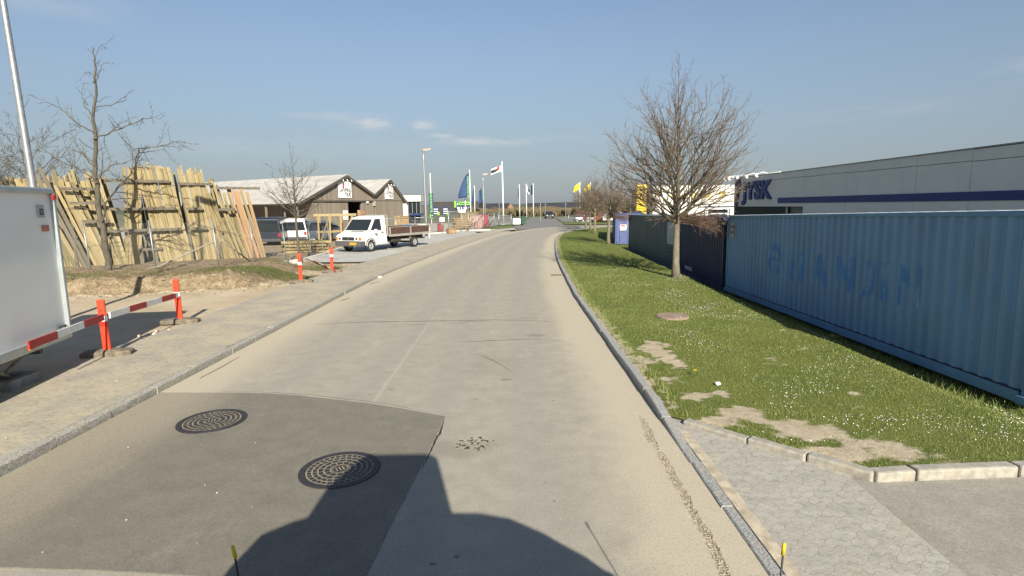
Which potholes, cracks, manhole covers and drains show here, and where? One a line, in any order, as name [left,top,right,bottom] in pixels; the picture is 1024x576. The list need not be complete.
manhole cover [175,409,247,434]
manhole cover [298,451,381,489]
pothole [454,436,495,451]
crack [636,411,731,576]
